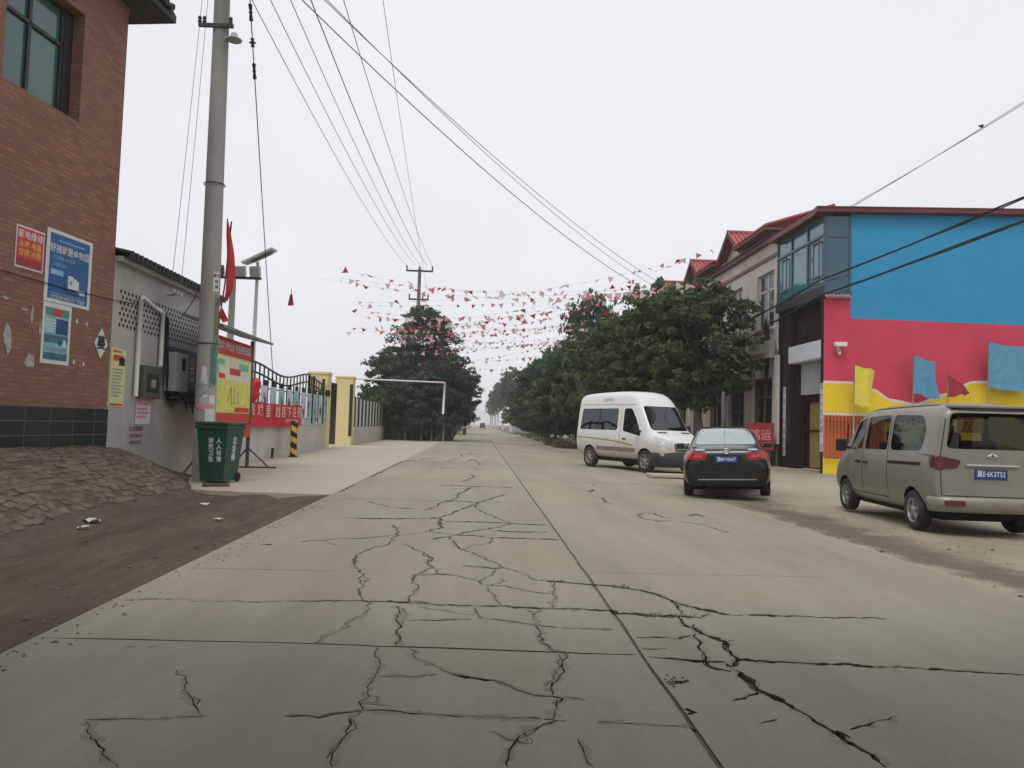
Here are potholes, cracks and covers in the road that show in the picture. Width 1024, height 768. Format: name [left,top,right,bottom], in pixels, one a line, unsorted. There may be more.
crack [86,449,1022,767]
